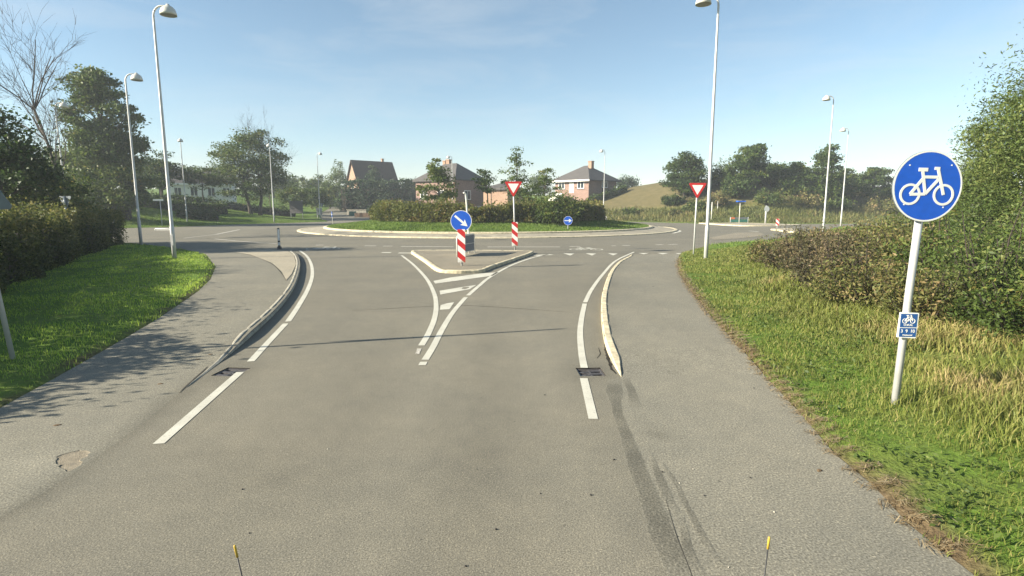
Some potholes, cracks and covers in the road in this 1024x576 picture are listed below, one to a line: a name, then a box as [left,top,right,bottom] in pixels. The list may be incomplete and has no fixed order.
drain grate [211,368,250,376]
drain grate [576,368,606,376]
